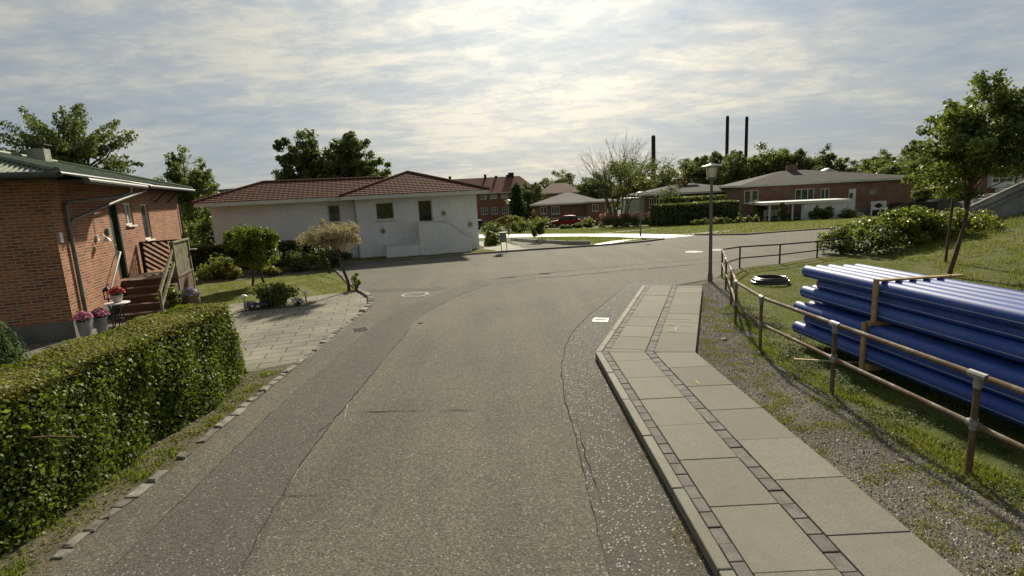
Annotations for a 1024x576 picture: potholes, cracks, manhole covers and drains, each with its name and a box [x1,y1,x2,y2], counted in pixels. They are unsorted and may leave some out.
crack [561,286,624,542]
crack [129,384,304,550]
crack [238,362,421,576]
